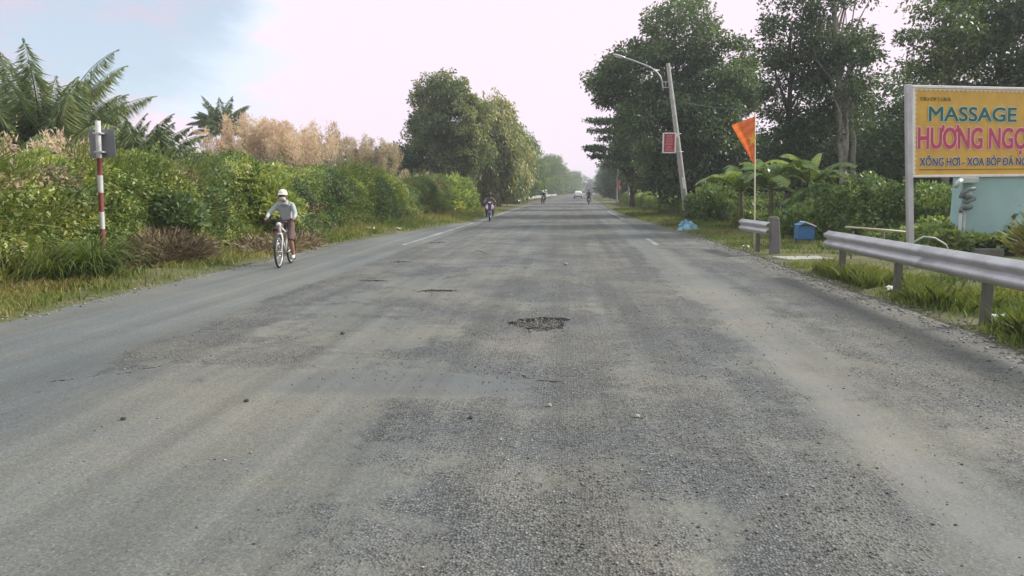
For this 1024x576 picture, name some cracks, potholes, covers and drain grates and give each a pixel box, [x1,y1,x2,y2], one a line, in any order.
pothole [500,316,571,332]
